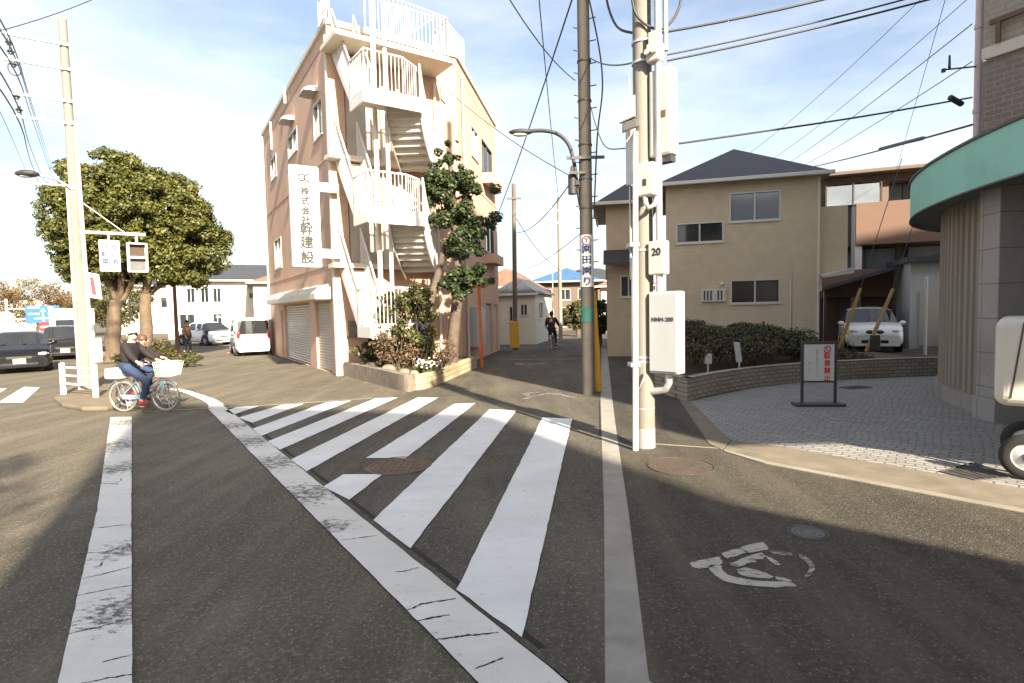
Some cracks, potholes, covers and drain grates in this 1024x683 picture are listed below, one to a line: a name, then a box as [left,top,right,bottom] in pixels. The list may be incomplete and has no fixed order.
manhole cover [363,456,432,476]
crack [403,598,499,640]
manhole cover [787,525,829,540]
crack [73,547,132,597]
crack [82,654,136,683]
manhole cover [647,457,715,475]
